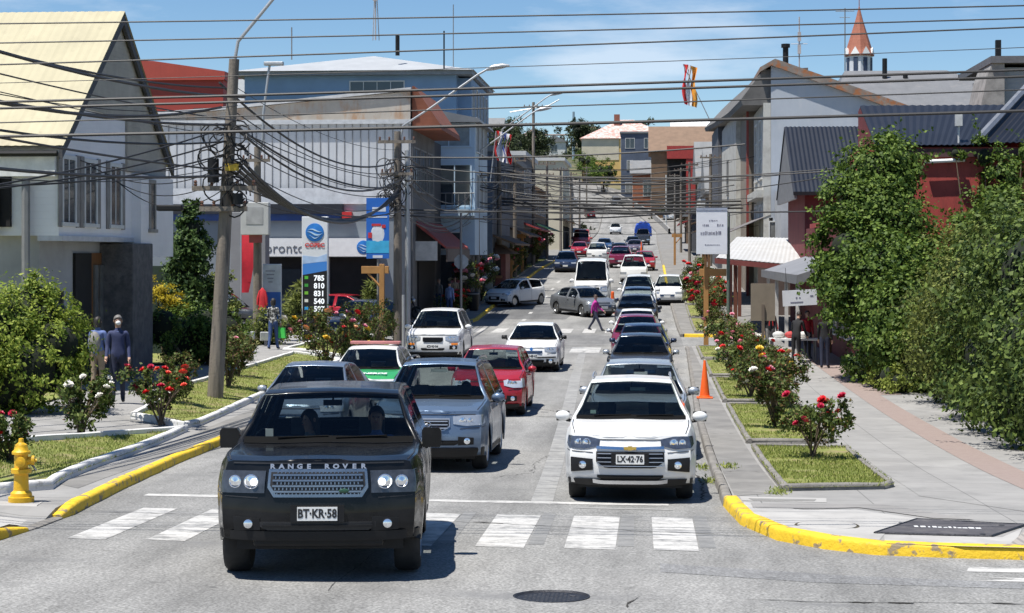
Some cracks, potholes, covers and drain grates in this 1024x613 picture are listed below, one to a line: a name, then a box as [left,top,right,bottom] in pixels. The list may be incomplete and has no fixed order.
utility cover [874,518,1024,537]
manhole cover [513,590,590,603]
